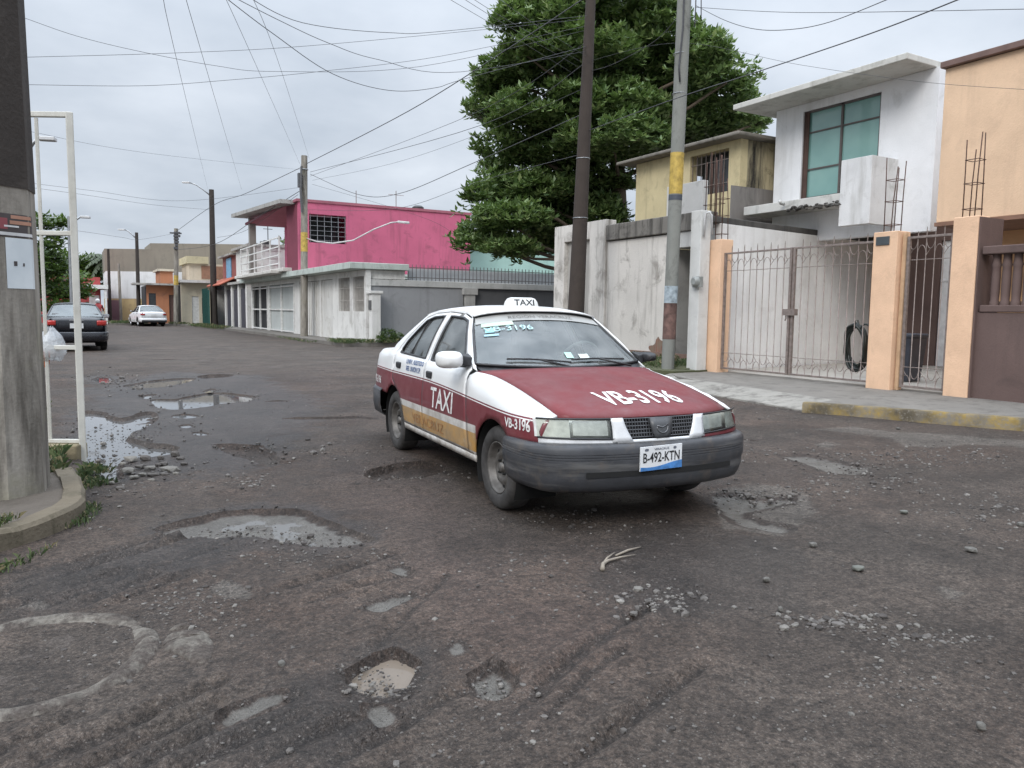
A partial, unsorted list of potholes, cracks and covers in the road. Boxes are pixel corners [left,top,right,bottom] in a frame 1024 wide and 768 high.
pothole [775,453,879,475]
pothole [155,508,376,547]
pothole [703,492,799,534]
pothole [76,410,180,480]
pothole [214,443,281,467]
crack [265,400,380,420]
pothole [343,646,422,698]
pothole [150,392,257,410]
pothole [466,653,520,701]
pothole [364,460,448,480]
